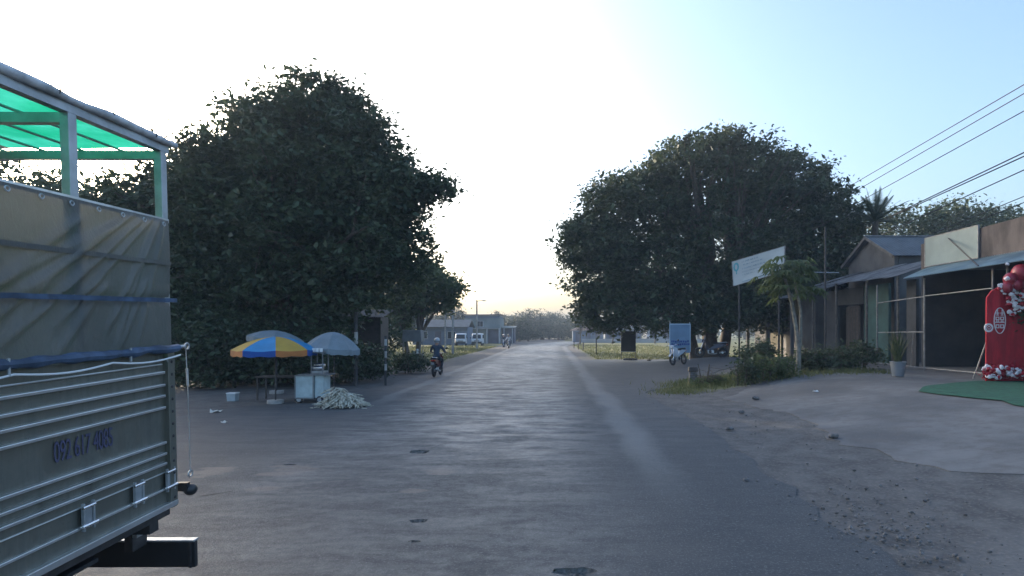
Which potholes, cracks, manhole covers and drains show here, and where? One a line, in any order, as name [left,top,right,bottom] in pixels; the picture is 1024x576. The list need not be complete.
pothole [552,567,597,576]
